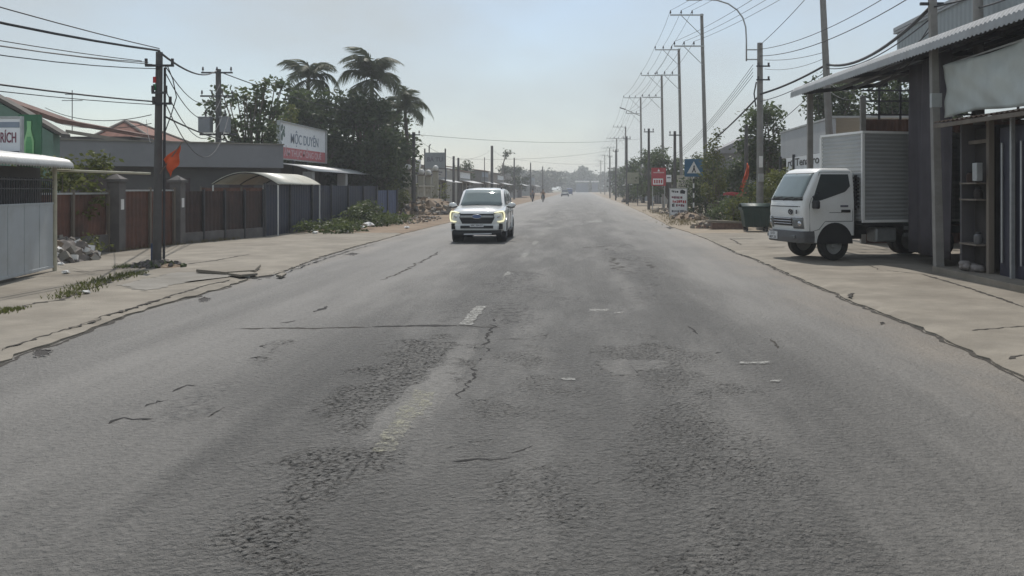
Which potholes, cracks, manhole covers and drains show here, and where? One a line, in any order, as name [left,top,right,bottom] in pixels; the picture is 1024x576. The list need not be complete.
crack [109,238,1024,576]
crack [0,312,140,367]
